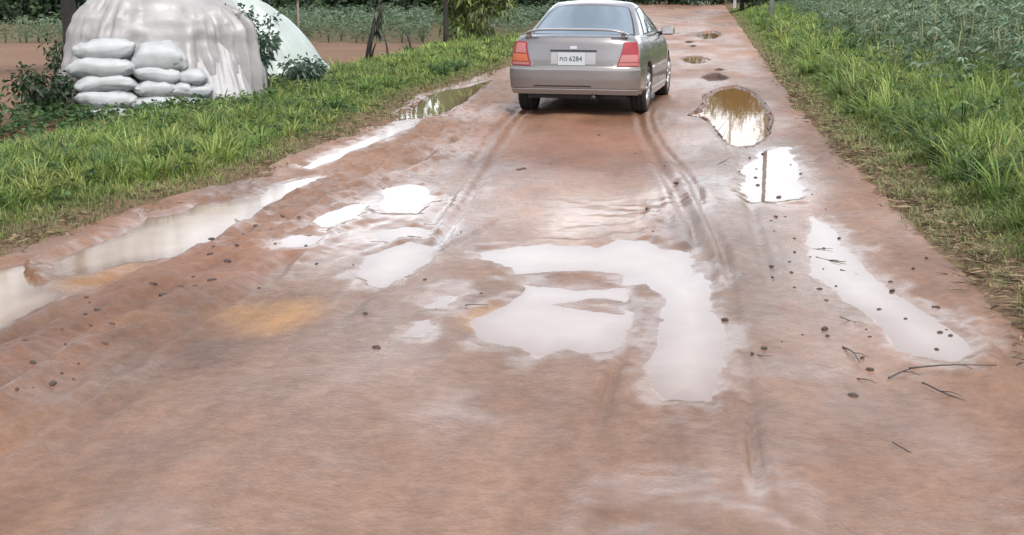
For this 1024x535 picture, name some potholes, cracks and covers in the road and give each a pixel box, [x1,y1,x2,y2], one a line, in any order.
pothole [701,73,731,81]
pothole [688,84,773,148]
pothole [681,55,711,64]
pothole [695,30,722,39]
